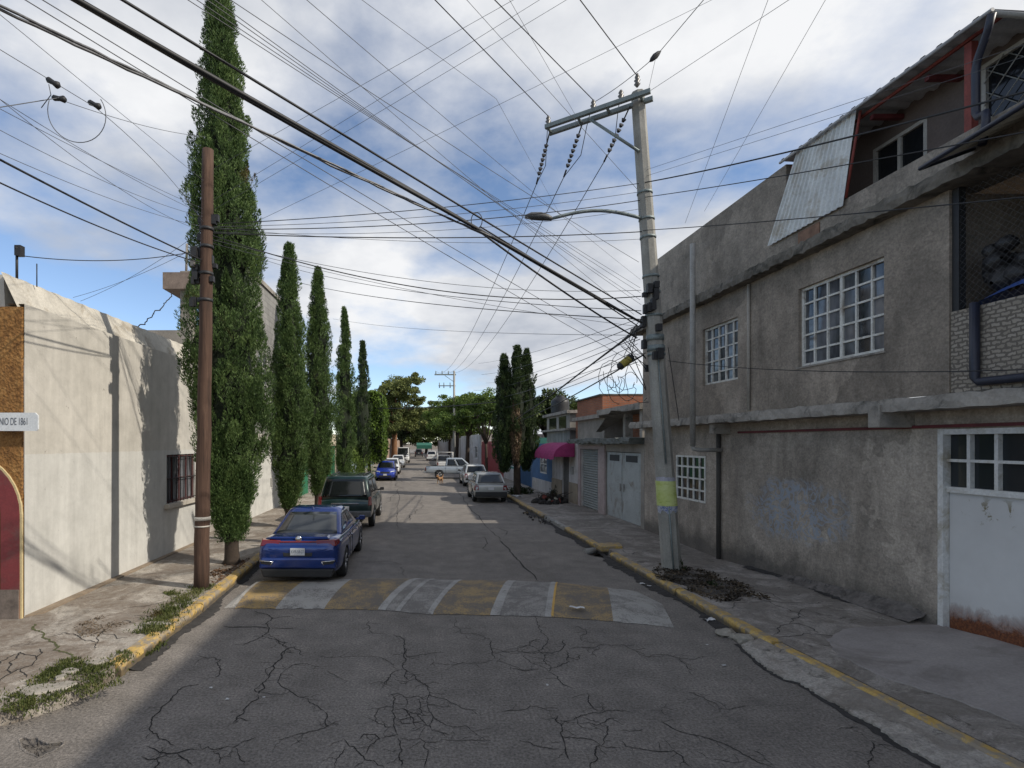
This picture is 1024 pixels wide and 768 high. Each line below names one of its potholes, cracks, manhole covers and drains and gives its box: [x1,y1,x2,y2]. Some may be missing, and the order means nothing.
crack [0,649,43,680]
crack [141,656,255,768]
pothole [18,736,65,758]
crack [225,611,705,766]
crack [503,692,773,768]
crack [839,727,896,768]
crack [732,587,833,653]
